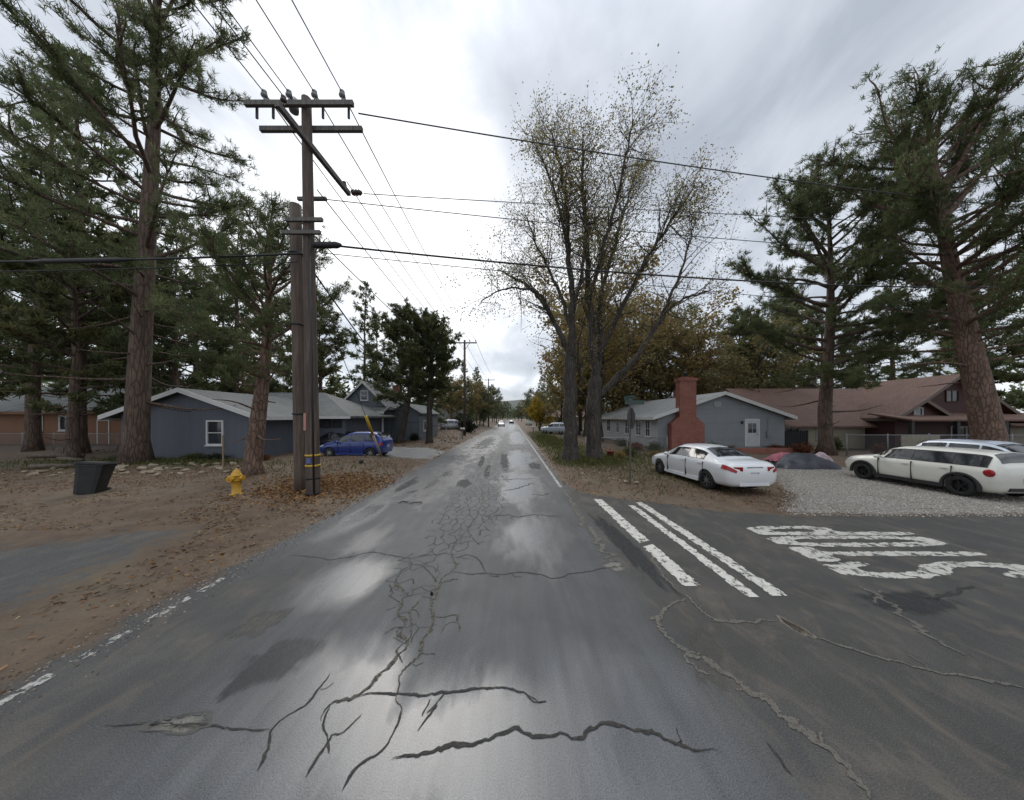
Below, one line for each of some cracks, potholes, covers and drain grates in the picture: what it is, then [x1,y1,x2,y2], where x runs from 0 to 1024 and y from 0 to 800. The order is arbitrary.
crack [767,742,792,775]
crack [814,636,1024,688]
crack [906,585,975,599]
pothole [137,709,213,735]
pothole [777,615,817,638]
crack [110,451,717,790]
